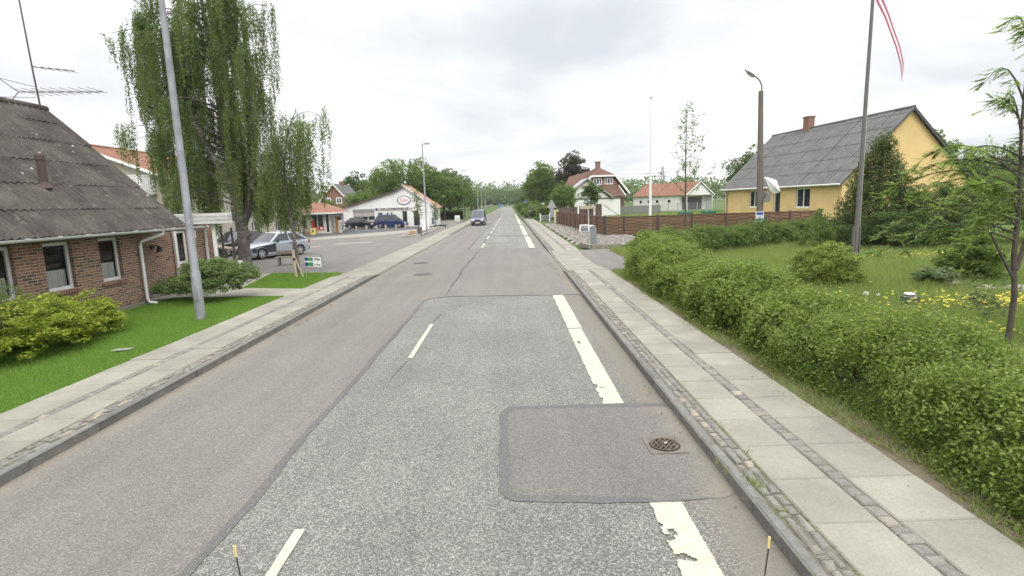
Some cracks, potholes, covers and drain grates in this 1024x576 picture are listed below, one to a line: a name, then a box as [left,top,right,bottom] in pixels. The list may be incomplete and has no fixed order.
drain grate [642,436,689,455]
